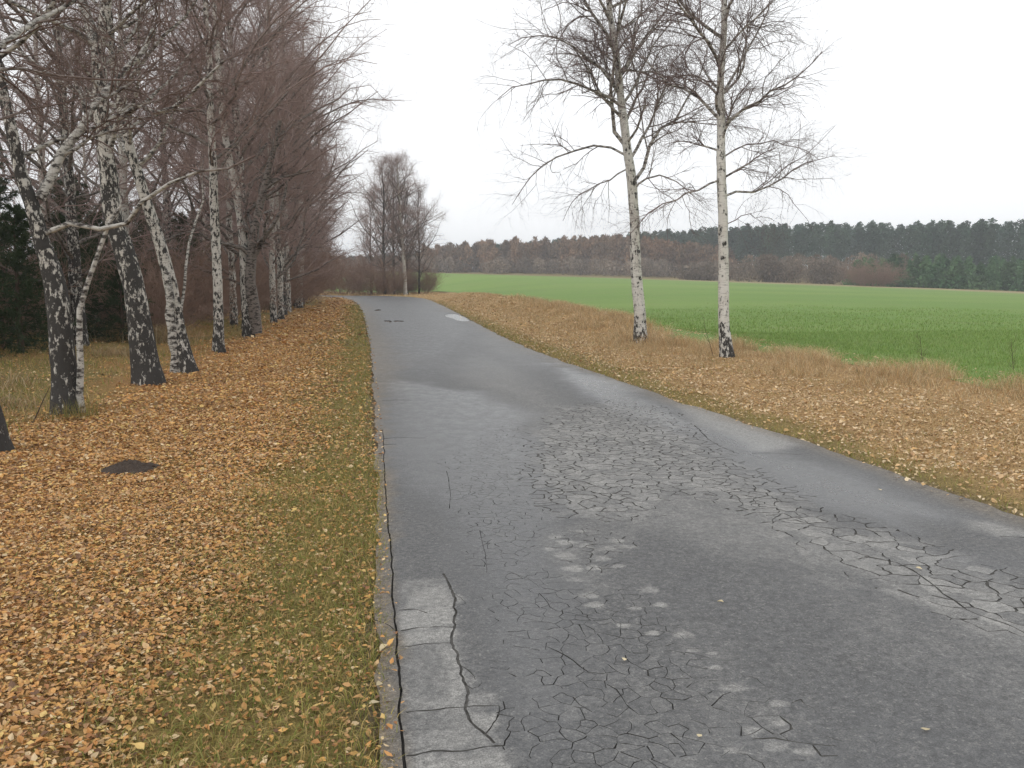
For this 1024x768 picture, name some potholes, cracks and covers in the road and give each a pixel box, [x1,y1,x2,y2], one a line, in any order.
crack [751,498,1024,637]
crack [401,425,731,768]
crack [515,399,824,525]
crack [709,676,841,768]
